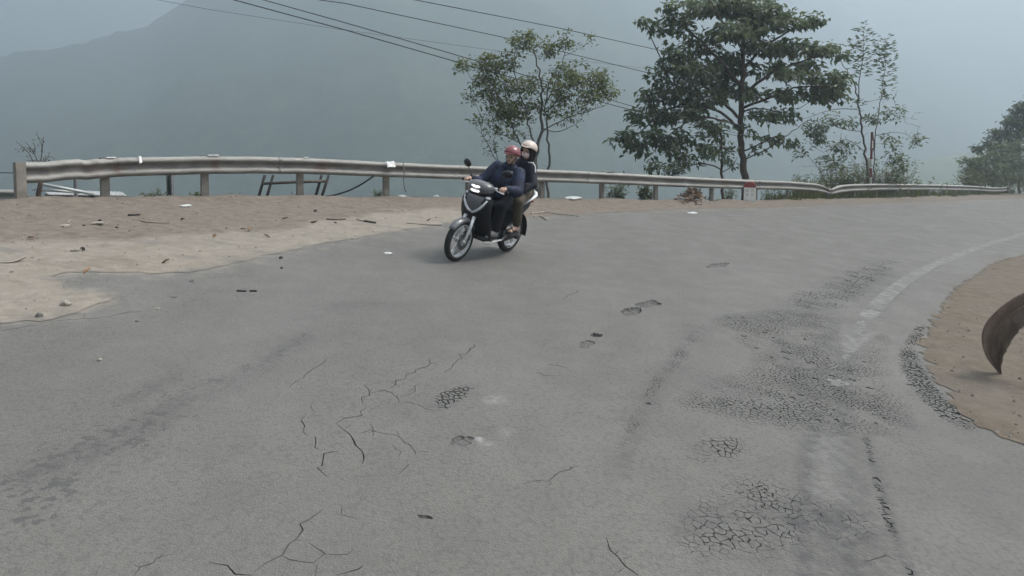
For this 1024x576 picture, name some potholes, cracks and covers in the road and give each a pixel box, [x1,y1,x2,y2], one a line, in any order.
crack [607,540,638,575]
crack [210,510,363,576]
crack [609,260,989,570]
crack [290,345,476,476]
